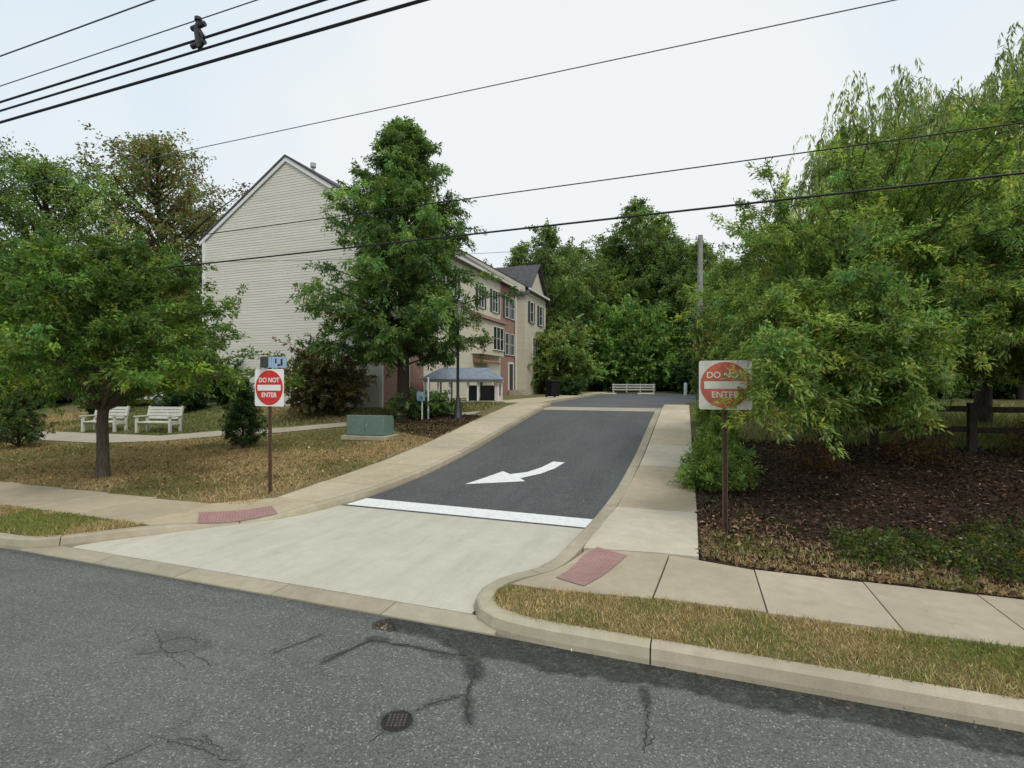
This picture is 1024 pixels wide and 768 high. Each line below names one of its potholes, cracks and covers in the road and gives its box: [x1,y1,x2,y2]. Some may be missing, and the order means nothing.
crack [119,626,213,667]
crack [322,640,476,728]
crack [643,702,656,753]
crack [103,733,240,768]
